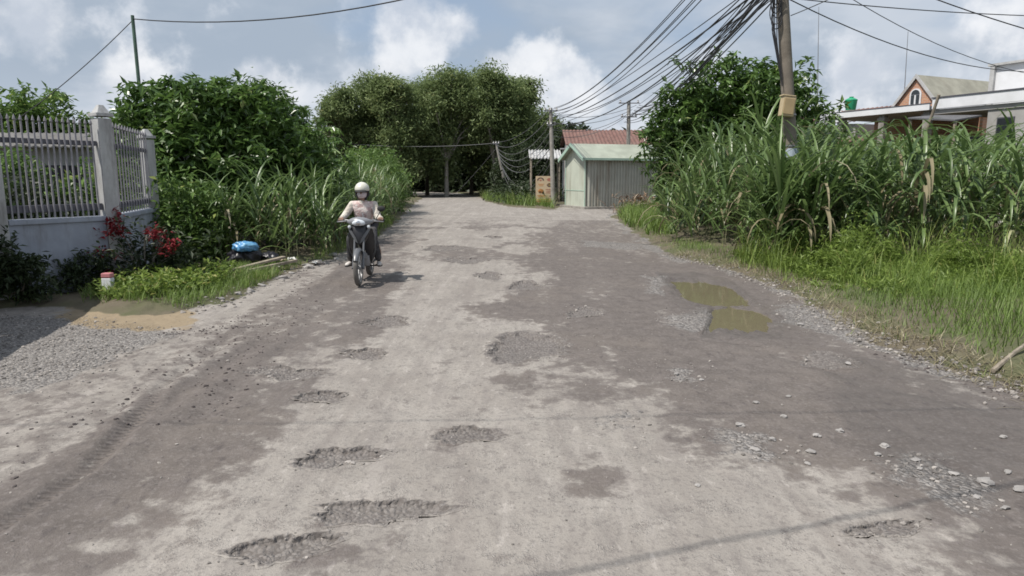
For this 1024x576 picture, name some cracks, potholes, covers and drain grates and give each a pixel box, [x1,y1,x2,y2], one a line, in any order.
pothole [650,269,798,347]
pothole [426,424,512,447]
pothole [288,389,350,404]
pothole [831,516,932,541]
pothole [471,271,503,281]
pothole [283,445,398,472]
pothole [338,347,391,361]
pothole [479,329,579,367]
pothole [303,497,469,528]
pothole [207,528,357,569]
pothole [355,315,412,329]
